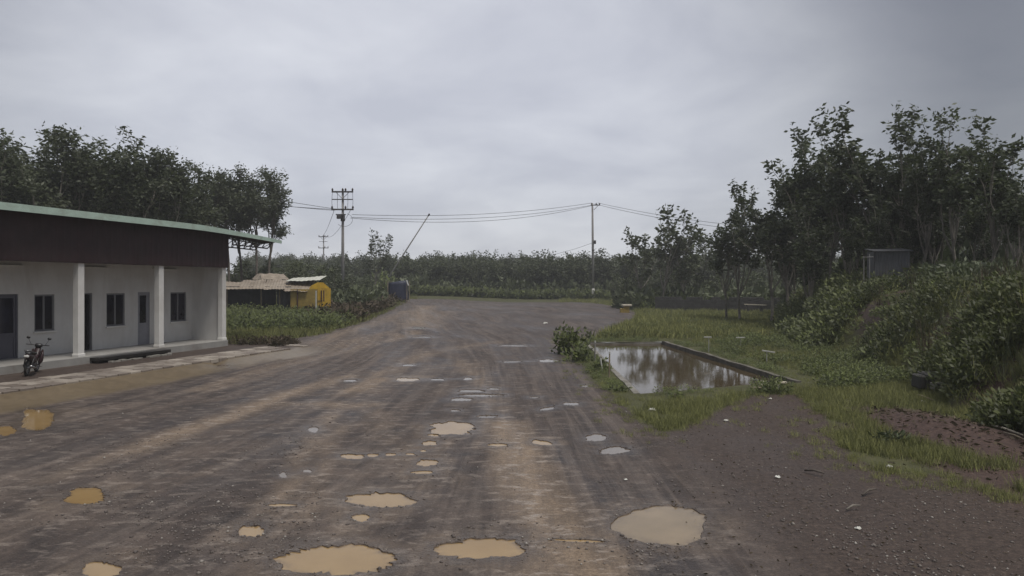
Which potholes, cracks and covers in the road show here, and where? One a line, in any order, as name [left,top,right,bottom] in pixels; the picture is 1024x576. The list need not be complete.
pothole [272,542,398,575]
pothole [345,491,418,508]
pothole [610,504,707,546]
pothole [21,408,55,431]
pothole [0,425,17,436]
pothole [585,433,607,441]
pothole [429,421,476,435]
pothole [599,446,631,454]
pothole [351,513,371,522]
pothole [433,537,527,559]
pothole [82,561,122,576]
pothole [238,525,265,537]
